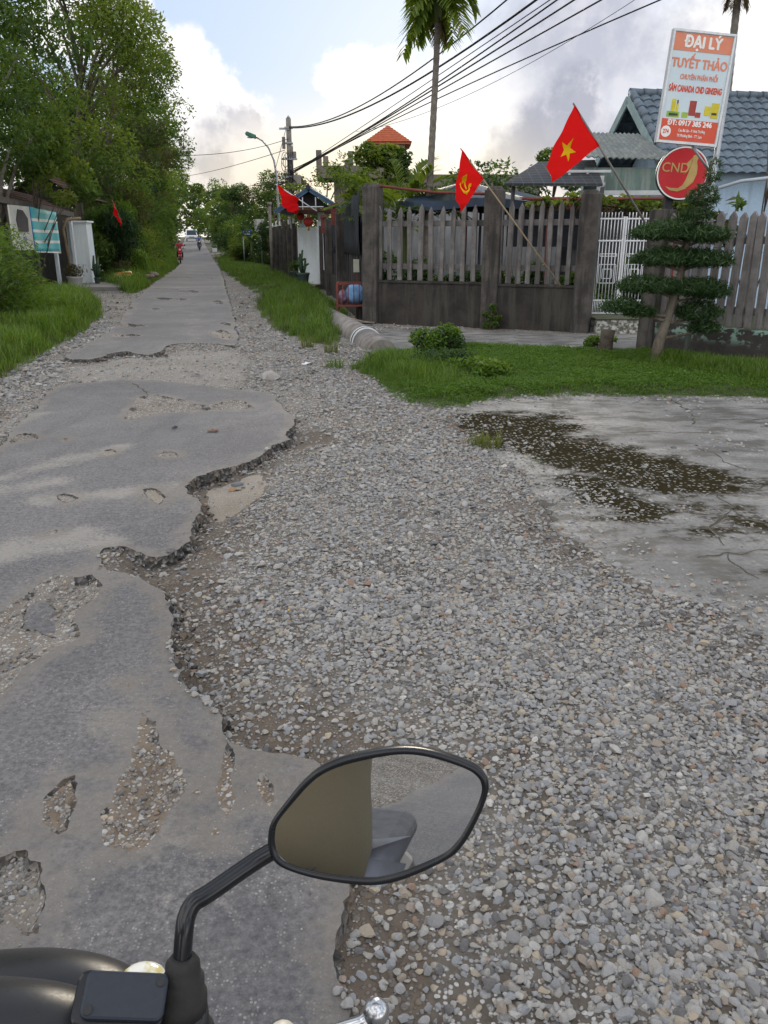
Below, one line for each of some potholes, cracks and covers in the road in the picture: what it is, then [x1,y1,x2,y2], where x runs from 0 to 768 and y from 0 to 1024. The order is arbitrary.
crack [629,398,768,579]
pothole [0,574,103,695]
pothole [10,433,39,444]
pothole [0,850,46,936]
pothole [100,713,187,851]
pothole [257,771,274,806]
pothole [143,488,167,504]
pothole [57,493,78,502]
pothole [216,742,236,815]
pothole [42,775,78,835]
pothole [124,394,255,420]
pothole [206,475,266,522]
